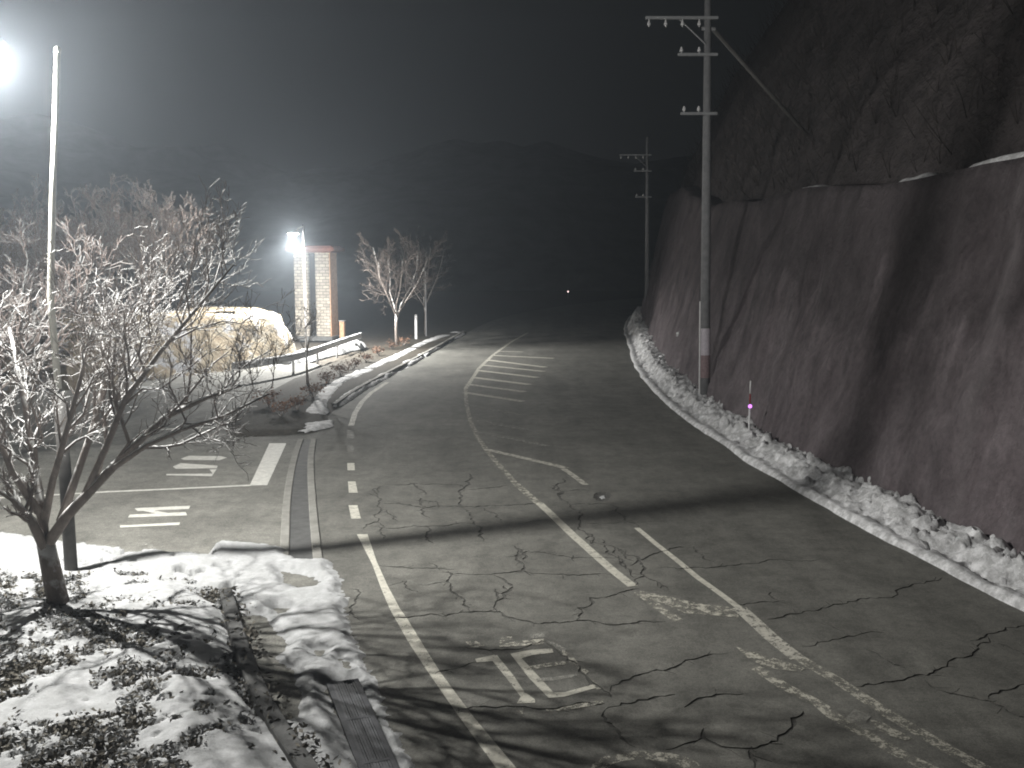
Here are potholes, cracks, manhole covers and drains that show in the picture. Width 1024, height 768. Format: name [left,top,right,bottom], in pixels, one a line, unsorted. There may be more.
crack [739,577,1024,718]
crack [363,471,547,543]
pothole [593,492,612,501]
crack [379,479,821,768]
crack [349,589,361,621]
drain grate [326,678,400,768]
